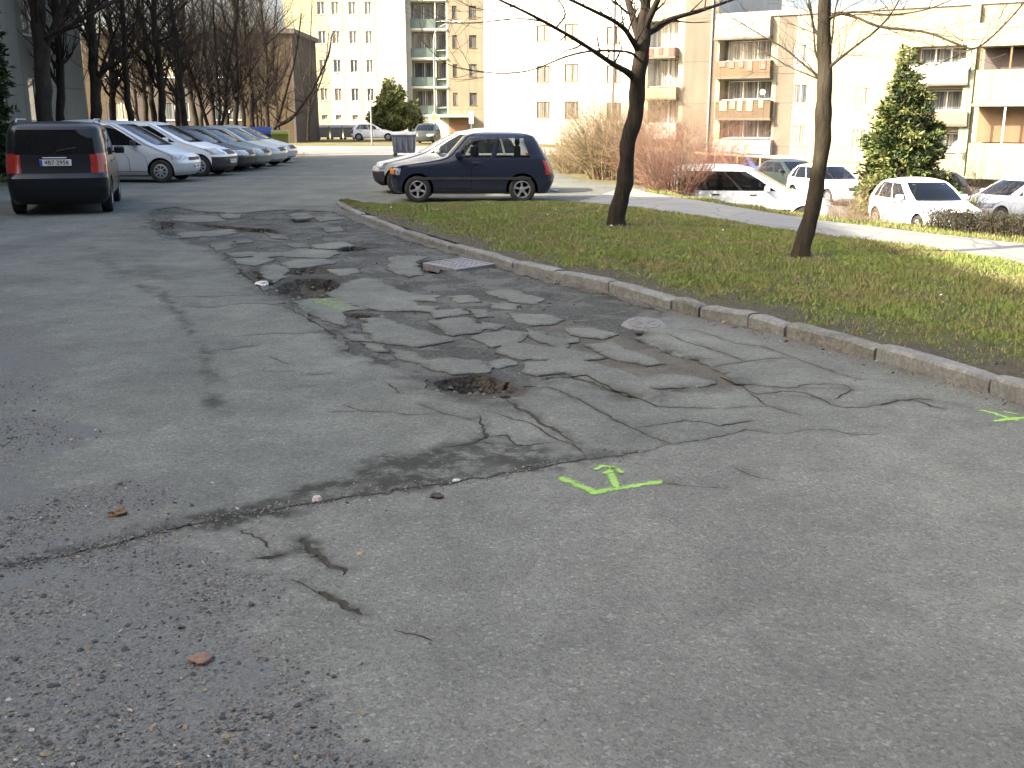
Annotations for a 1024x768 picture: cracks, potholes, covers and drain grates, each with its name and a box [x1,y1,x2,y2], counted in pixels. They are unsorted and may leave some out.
pothole [276,279,340,299]
manhole cover [621,317,667,330]
crack [171,266,335,350]
pothole [434,375,518,395]
crack [241,531,282,559]
crack [341,330,944,457]
